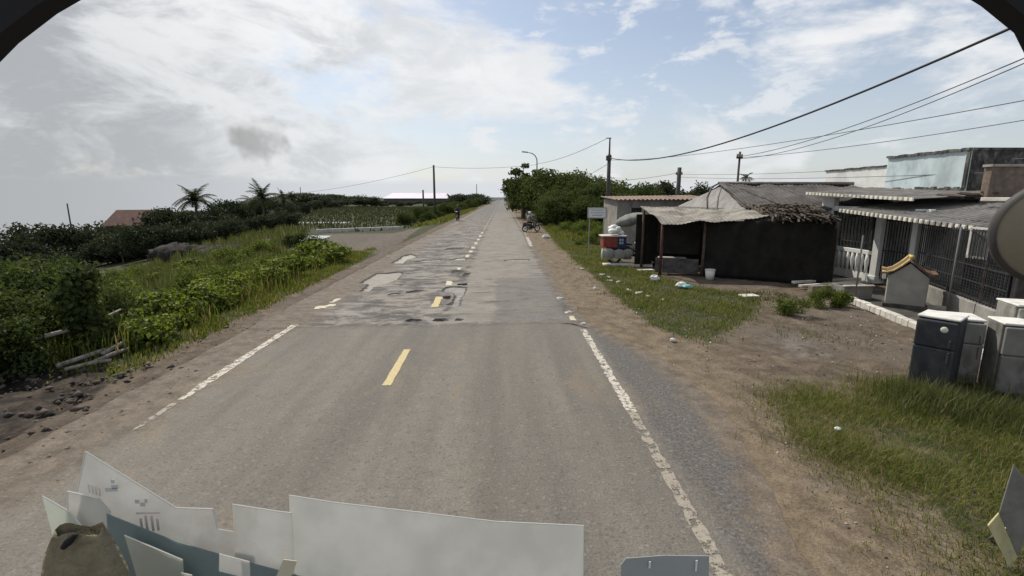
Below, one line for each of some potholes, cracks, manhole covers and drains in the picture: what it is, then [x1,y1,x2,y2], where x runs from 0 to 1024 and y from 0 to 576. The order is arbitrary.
pothole [441,286,468,307]
